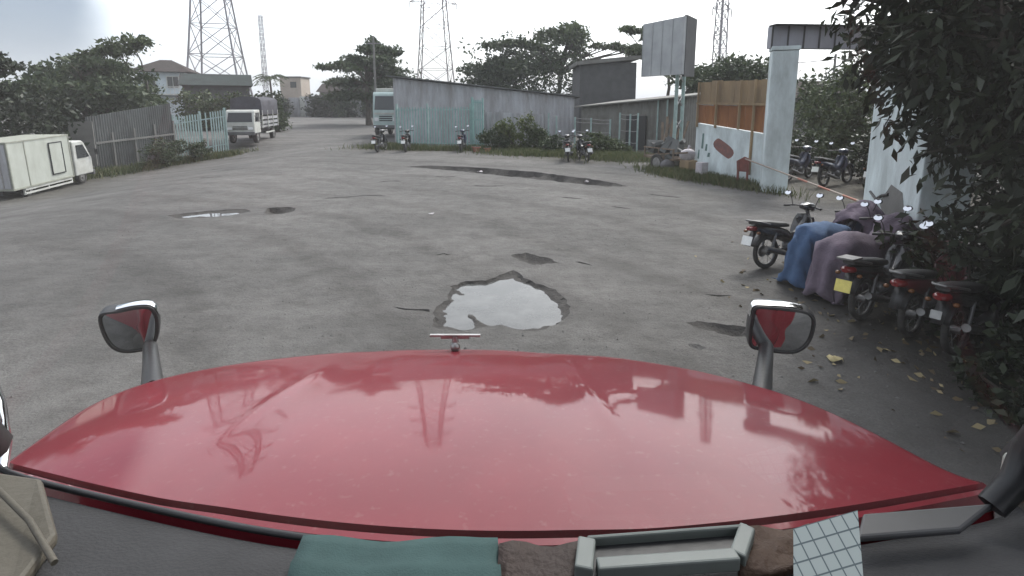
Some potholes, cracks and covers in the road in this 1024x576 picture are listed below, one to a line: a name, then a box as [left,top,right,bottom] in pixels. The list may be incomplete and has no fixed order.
pothole [511,252,560,265]
pothole [264,207,296,215]
pothole [432,270,571,331]
pothole [686,321,746,337]
pothole [168,209,250,219]
pothole [407,165,625,187]
